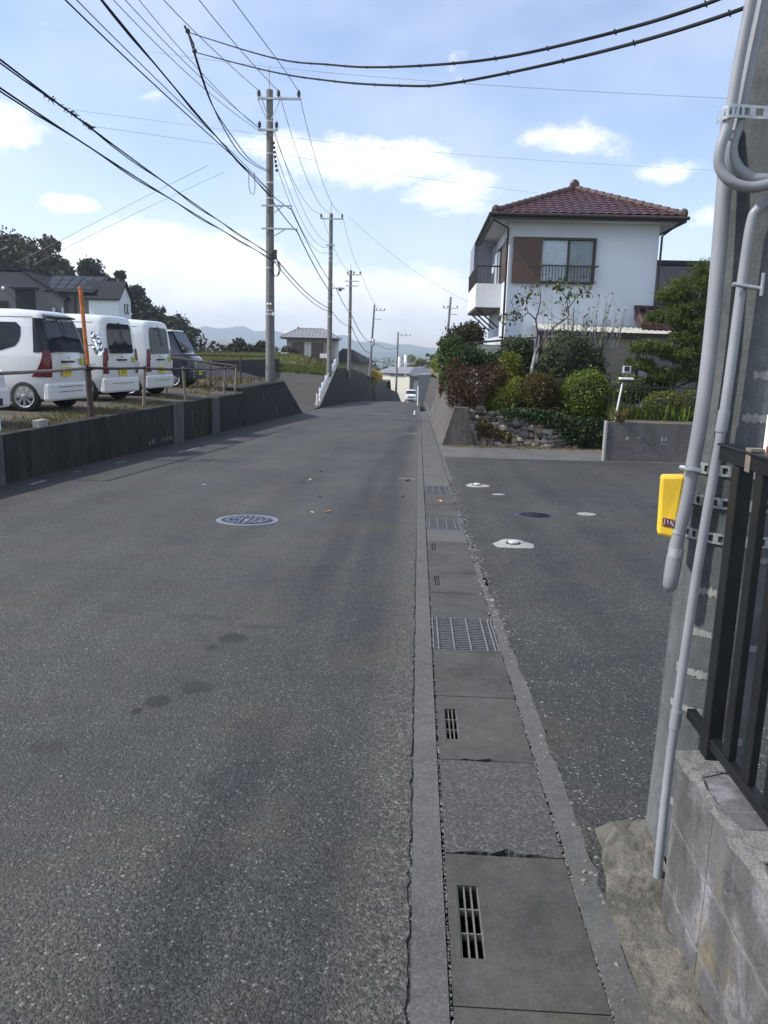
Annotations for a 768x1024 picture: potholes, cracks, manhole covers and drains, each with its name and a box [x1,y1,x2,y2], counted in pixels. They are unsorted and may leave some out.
drain grate [426,518,463,530]
crack [404,533,417,1024]
drain grate [432,617,500,653]
drain grate [424,485,452,494]
manhole cover [216,515,279,526]
